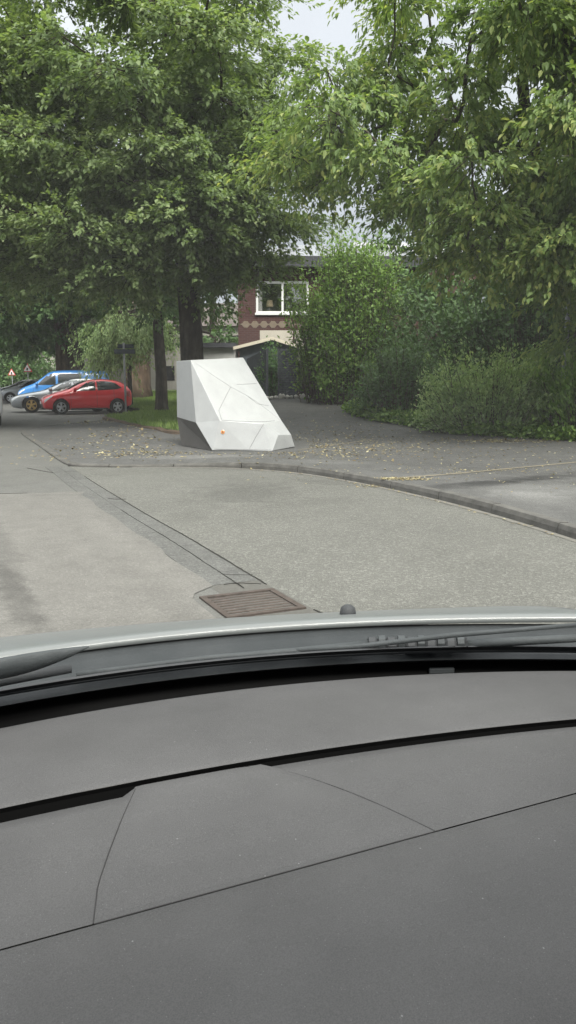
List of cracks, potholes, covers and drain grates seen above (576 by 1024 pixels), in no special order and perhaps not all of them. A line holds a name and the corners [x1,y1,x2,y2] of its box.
drain grate [199,588,306,618]
